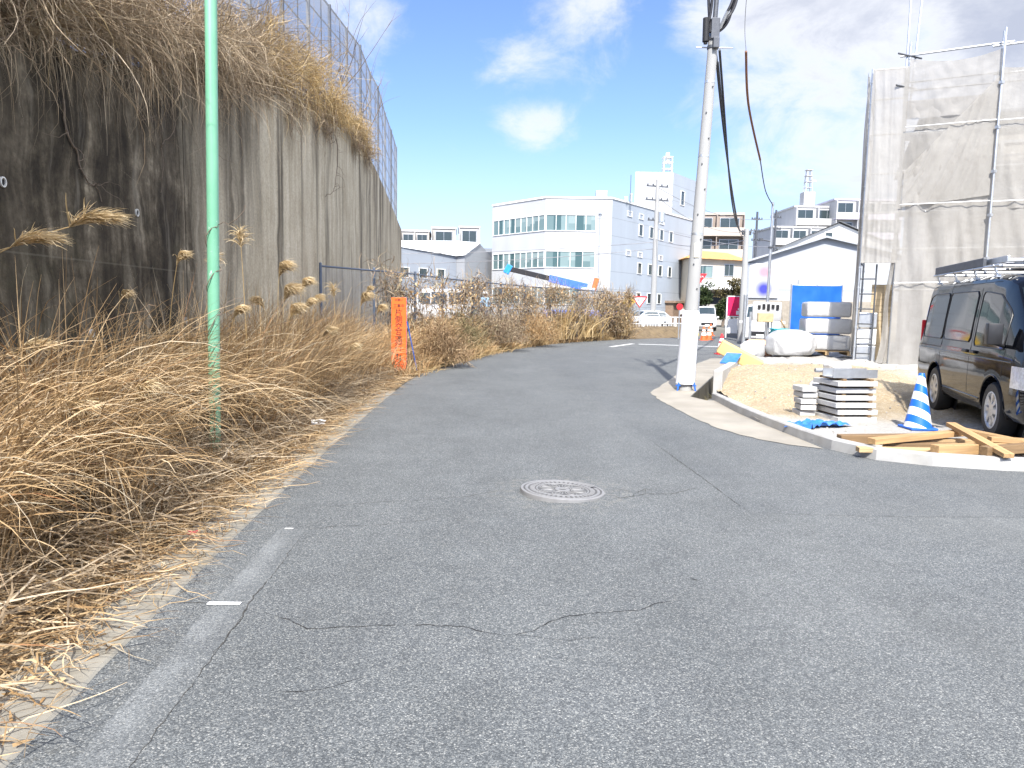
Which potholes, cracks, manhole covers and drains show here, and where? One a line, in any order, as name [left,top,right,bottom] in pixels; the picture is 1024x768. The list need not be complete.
manhole cover [520,480,605,503]
crack [129,539,299,768]
crack [272,601,668,650]
